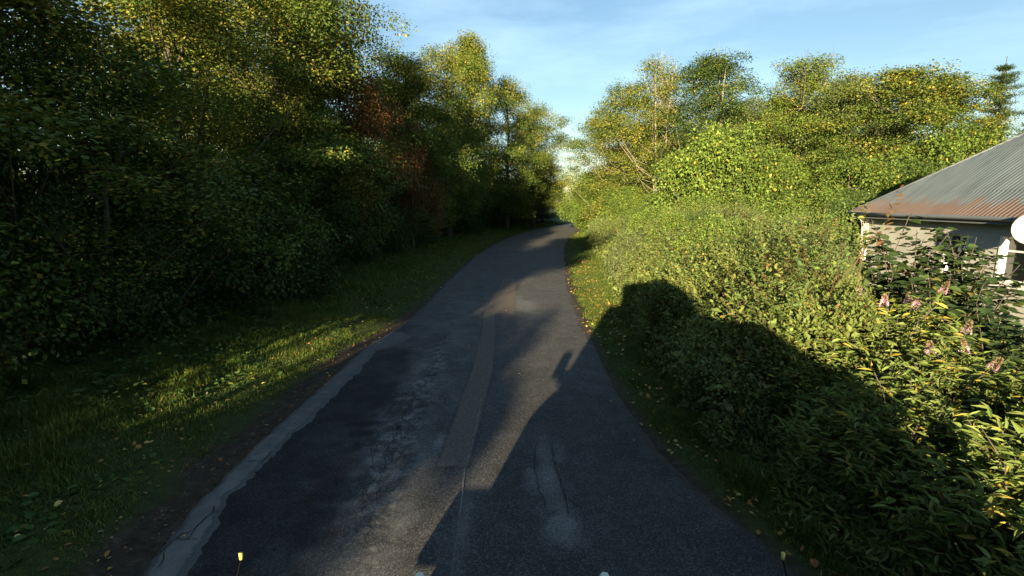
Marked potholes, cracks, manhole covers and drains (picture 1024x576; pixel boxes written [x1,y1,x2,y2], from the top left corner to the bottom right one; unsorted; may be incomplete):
crack [355,335,448,557]
crack [156,502,234,568]
crack [525,440,583,513]
